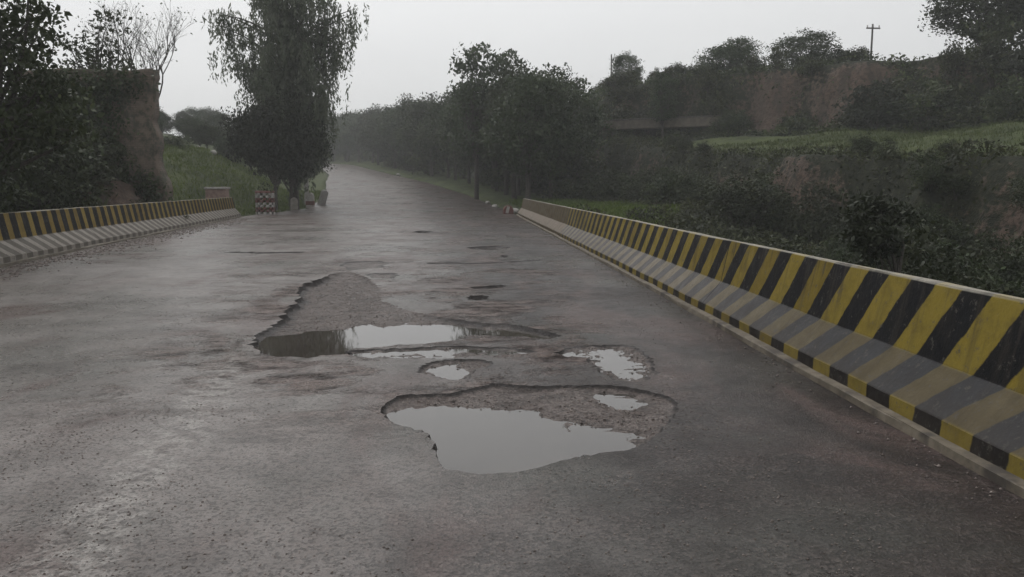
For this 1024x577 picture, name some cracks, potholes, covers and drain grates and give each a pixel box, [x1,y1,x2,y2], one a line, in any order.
pothole [554,345,661,382]
pothole [380,383,679,474]
pothole [247,271,562,358]
pothole [417,359,493,380]
